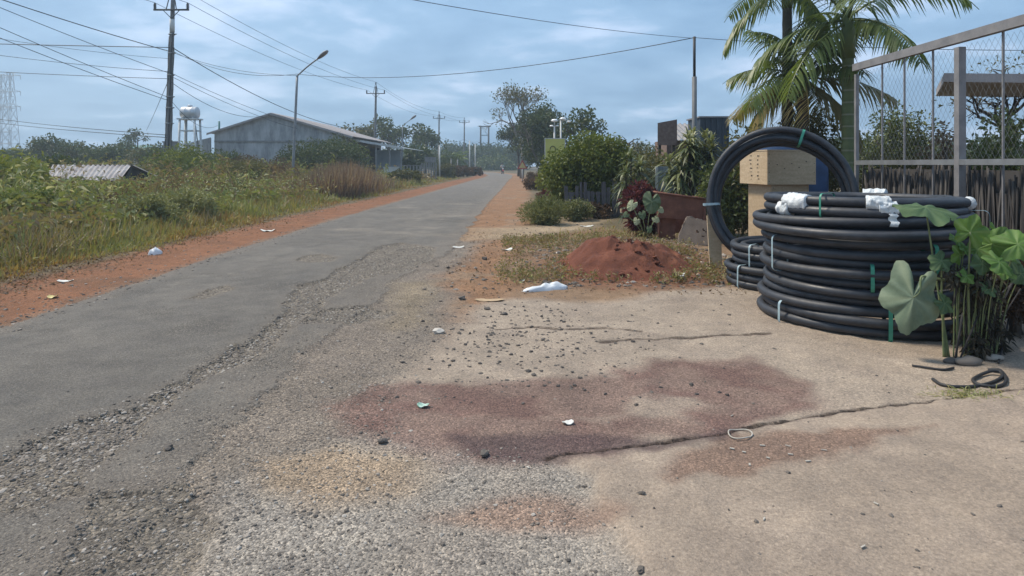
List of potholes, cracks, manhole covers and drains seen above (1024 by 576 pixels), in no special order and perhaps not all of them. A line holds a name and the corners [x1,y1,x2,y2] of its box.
crack [497,326,770,344]
